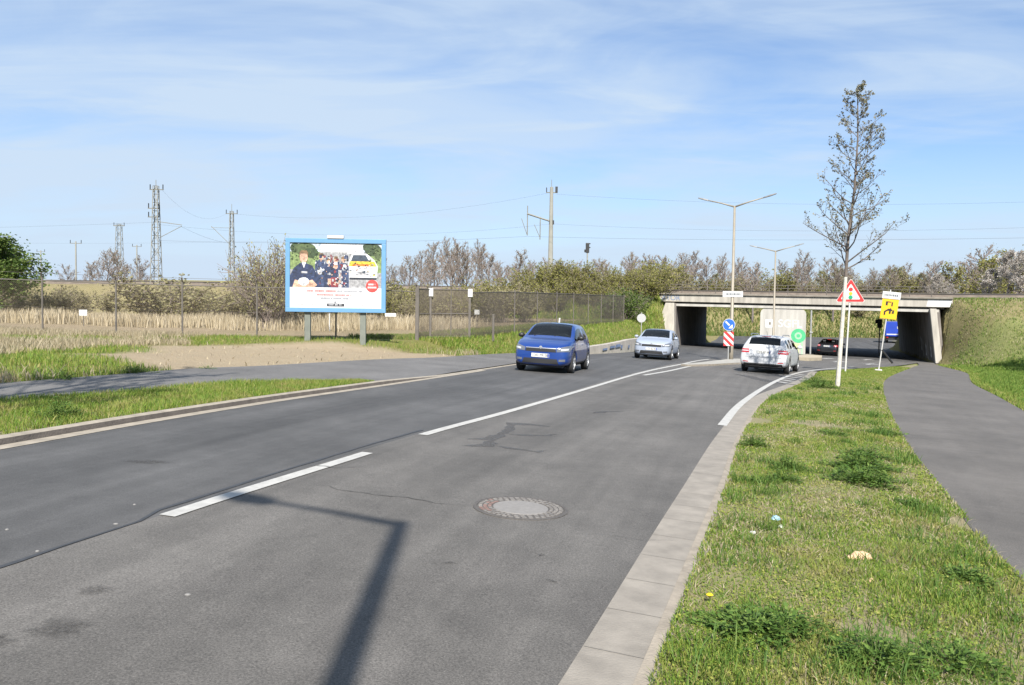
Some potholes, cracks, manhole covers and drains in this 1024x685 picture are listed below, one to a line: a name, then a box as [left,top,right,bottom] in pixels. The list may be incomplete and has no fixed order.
manhole cover [473,496,568,521]
